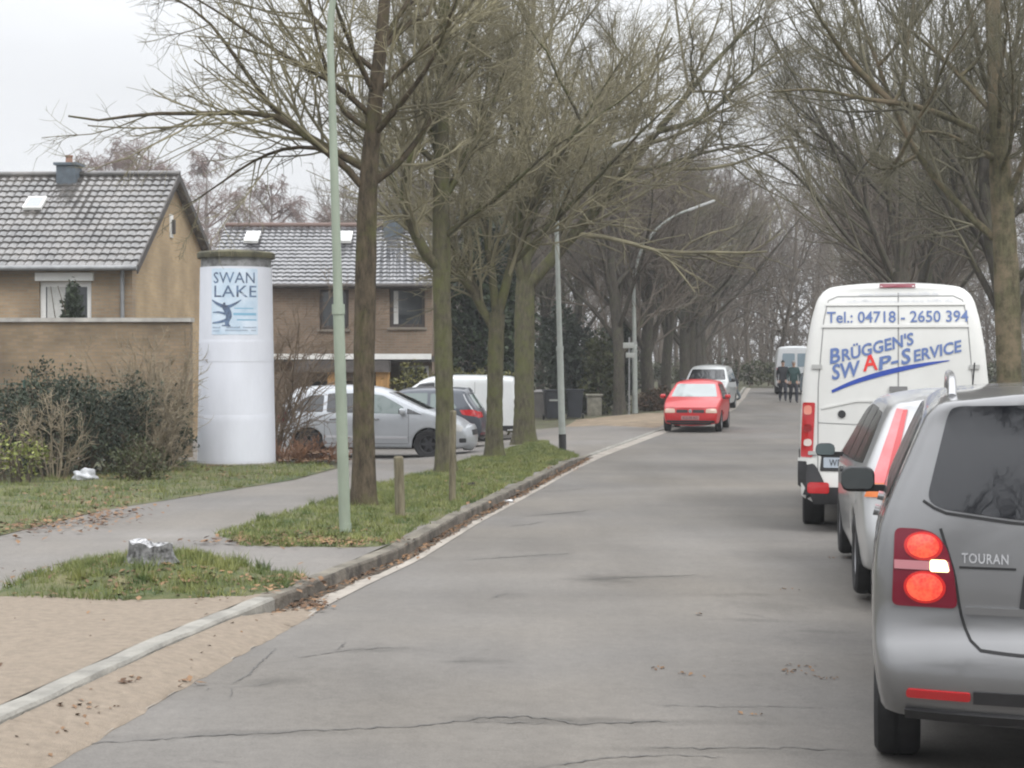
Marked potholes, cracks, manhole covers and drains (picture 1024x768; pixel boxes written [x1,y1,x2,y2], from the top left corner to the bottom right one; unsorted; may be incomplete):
crack [539,746,853,768]
crack [91,705,828,744]
crack [206,647,280,697]
